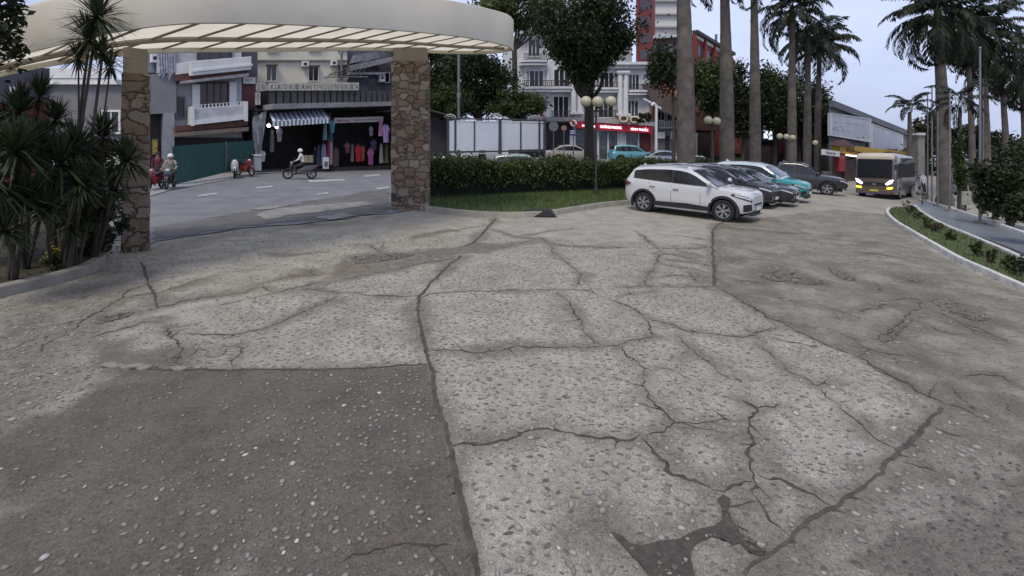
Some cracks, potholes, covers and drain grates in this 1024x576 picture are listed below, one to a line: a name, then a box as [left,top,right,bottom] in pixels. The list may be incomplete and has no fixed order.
crack [342,542,450,576]
crack [432,228,1017,536]
pothole [878,316,913,343]
crack [5,226,505,367]
pothole [760,268,828,285]
